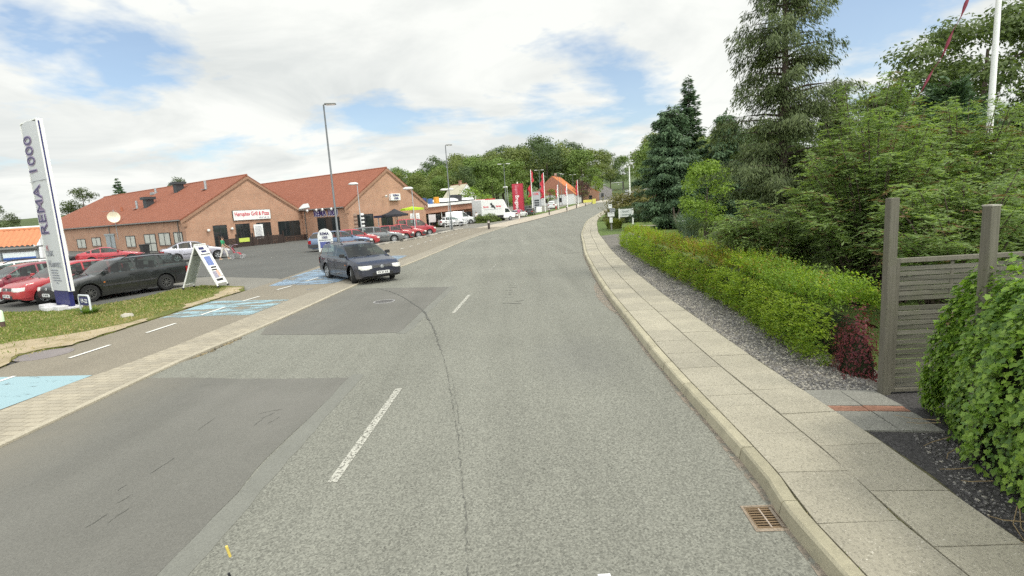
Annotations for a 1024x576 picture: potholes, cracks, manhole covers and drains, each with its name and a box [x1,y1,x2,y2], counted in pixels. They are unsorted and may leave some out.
drain grate [740,505,790,532]
crack [377,288,469,575]
